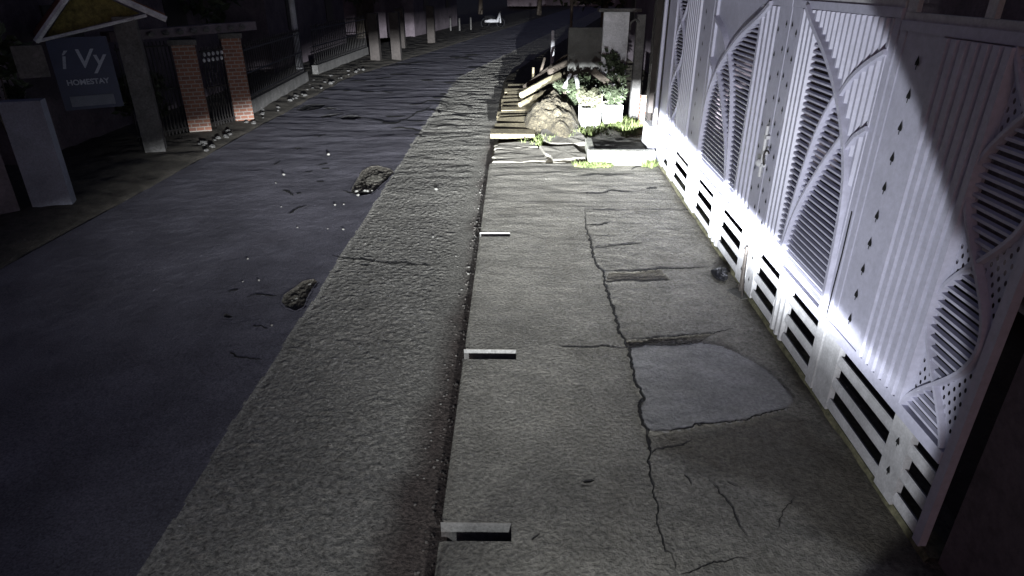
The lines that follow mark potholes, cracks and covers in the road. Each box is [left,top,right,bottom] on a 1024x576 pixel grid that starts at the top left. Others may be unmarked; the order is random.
crack [561,215,792,574]
